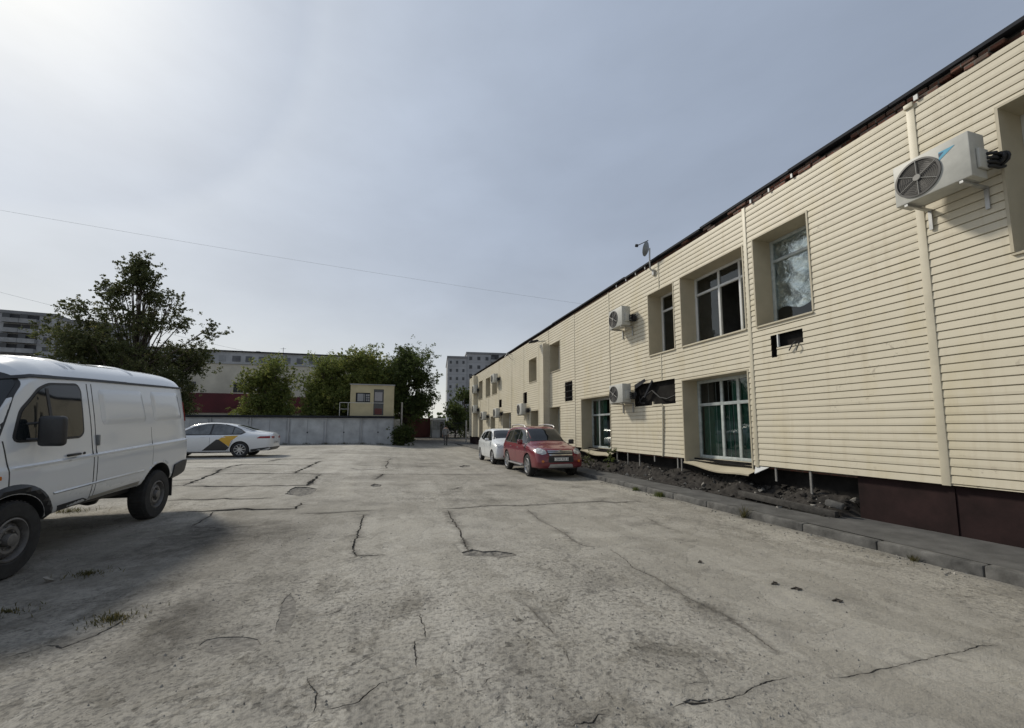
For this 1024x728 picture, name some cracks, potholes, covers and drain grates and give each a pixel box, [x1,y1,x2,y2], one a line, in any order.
pothole [462,549,516,558]
pothole [285,487,316,496]
crack [674,645,991,707]
crack [307,614,448,713]
